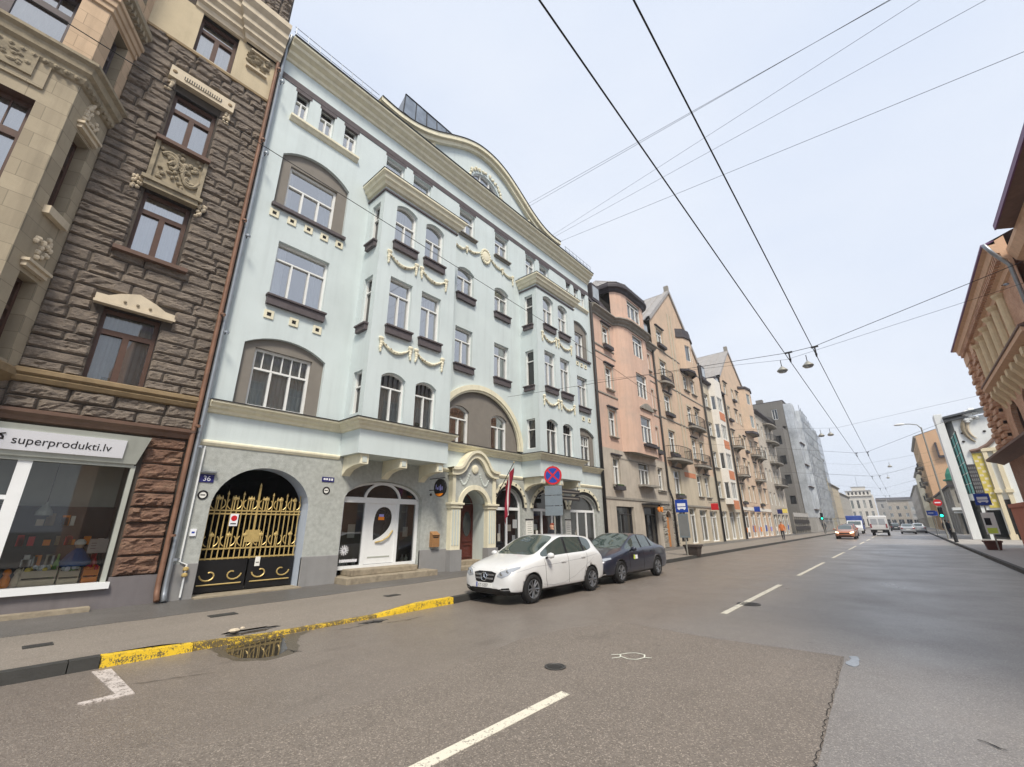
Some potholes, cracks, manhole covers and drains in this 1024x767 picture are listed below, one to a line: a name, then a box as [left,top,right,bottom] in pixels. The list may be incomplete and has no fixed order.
manhole cover [544,663,566,671]
